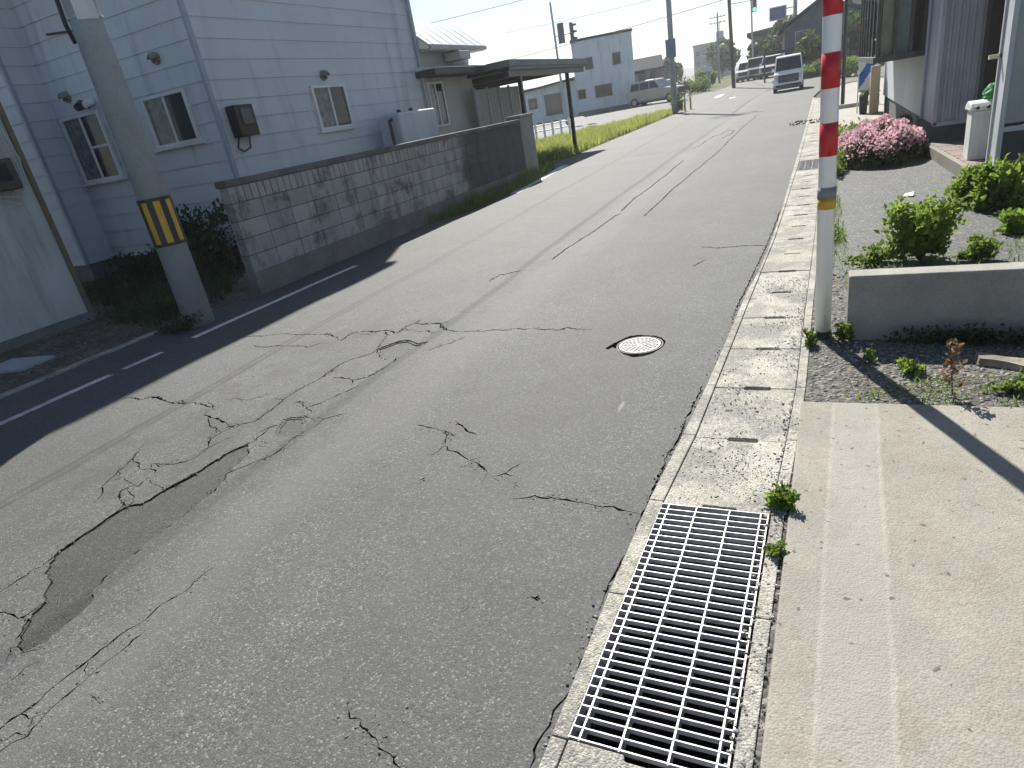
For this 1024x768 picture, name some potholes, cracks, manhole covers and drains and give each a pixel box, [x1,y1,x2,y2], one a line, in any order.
crack [516,211,781,768]
crack [243,321,590,349]
crack [0,335,414,752]
crack [420,421,519,484]
drain grate [568,503,769,768]
drain grate [796,159,819,171]
crack [347,706,400,768]
manhole cover [605,335,665,357]
pothole [16,444,249,653]
crack [551,130,733,260]
